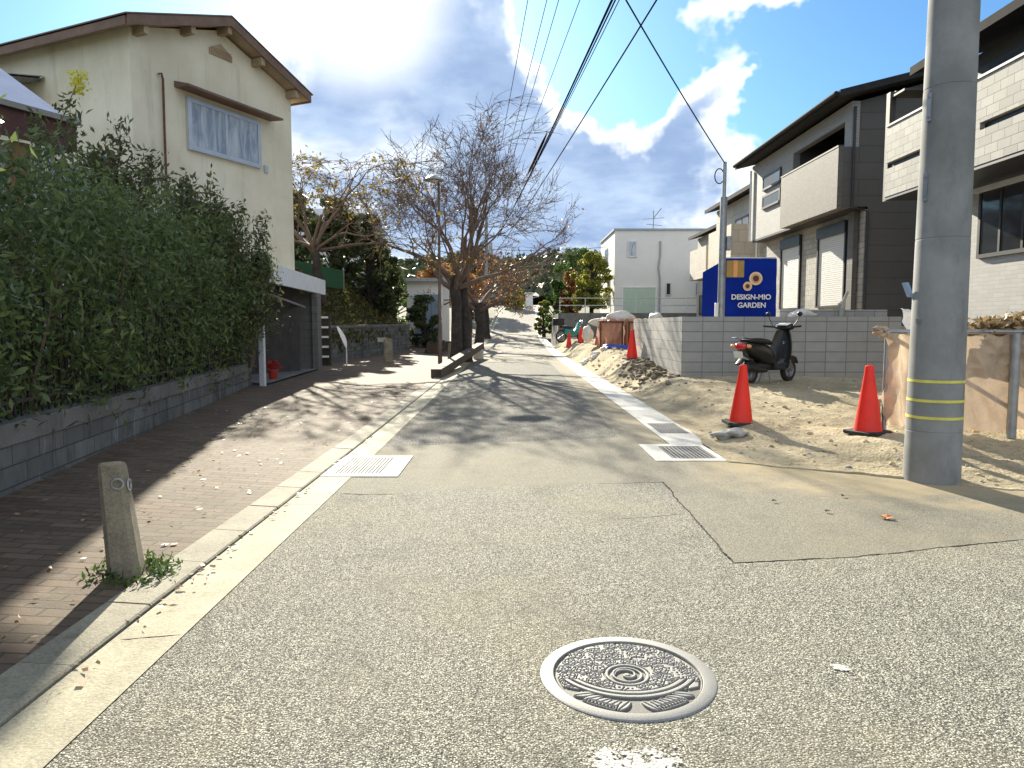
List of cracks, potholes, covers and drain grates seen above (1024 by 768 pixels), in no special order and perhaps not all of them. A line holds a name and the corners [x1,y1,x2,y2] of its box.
drain grate [642,423,693,443]
drain grate [320,456,413,489]
drain grate [639,444,727,461]
manhole cover [540,637,718,723]
